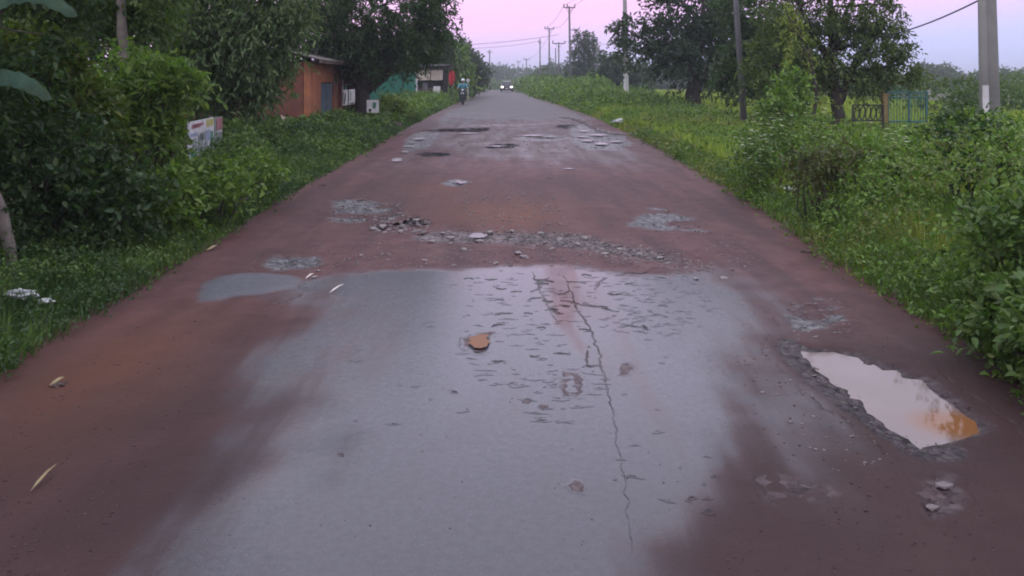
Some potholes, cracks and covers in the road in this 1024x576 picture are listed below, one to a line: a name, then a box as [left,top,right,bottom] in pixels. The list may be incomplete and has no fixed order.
pothole [762,332,1024,472]
crack [464,271,666,552]
pothole [363,211,443,237]
pothole [384,227,714,271]
pothole [437,179,480,187]
pothole [765,293,863,336]
